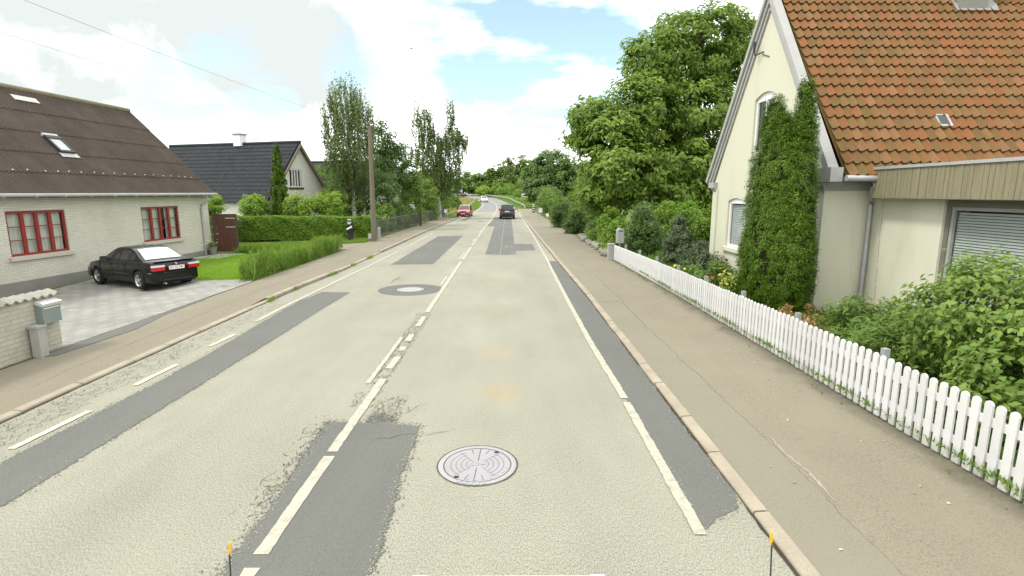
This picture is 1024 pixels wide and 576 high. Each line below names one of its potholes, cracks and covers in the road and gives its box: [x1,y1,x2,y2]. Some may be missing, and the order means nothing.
manhole cover [437,445,518,486]
manhole cover [378,284,442,295]
crack [1,343,206,446]
